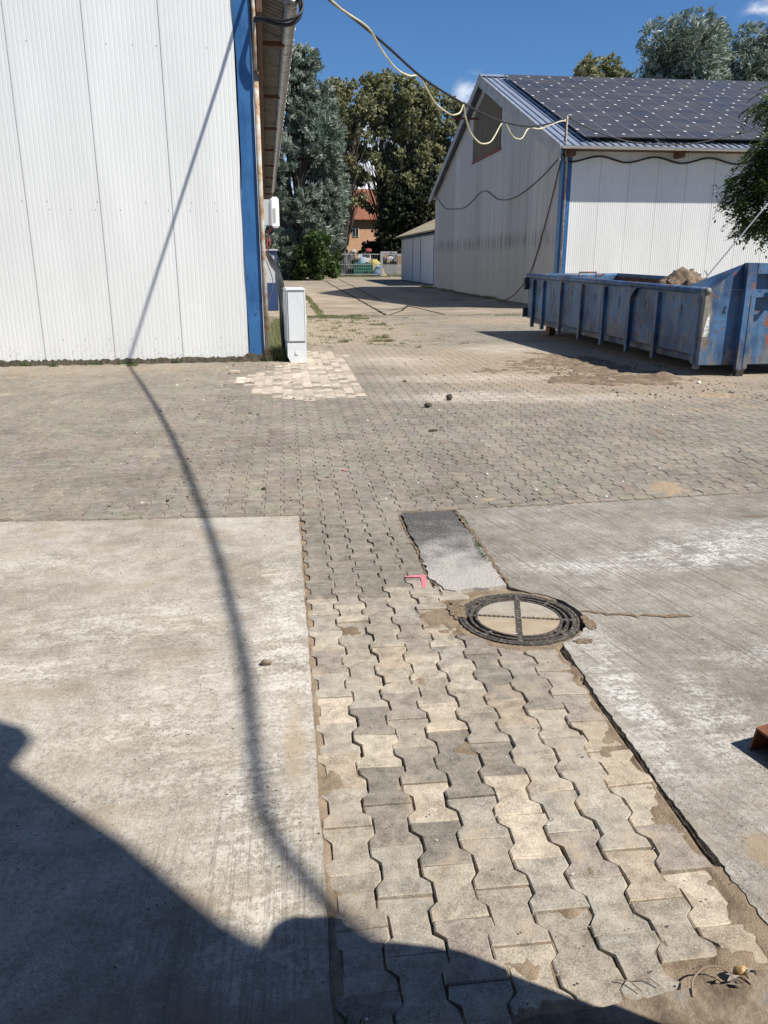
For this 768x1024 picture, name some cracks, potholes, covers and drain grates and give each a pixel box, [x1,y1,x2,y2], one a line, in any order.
crack [579,610,691,618]
manhole cover [458,594,580,646]
